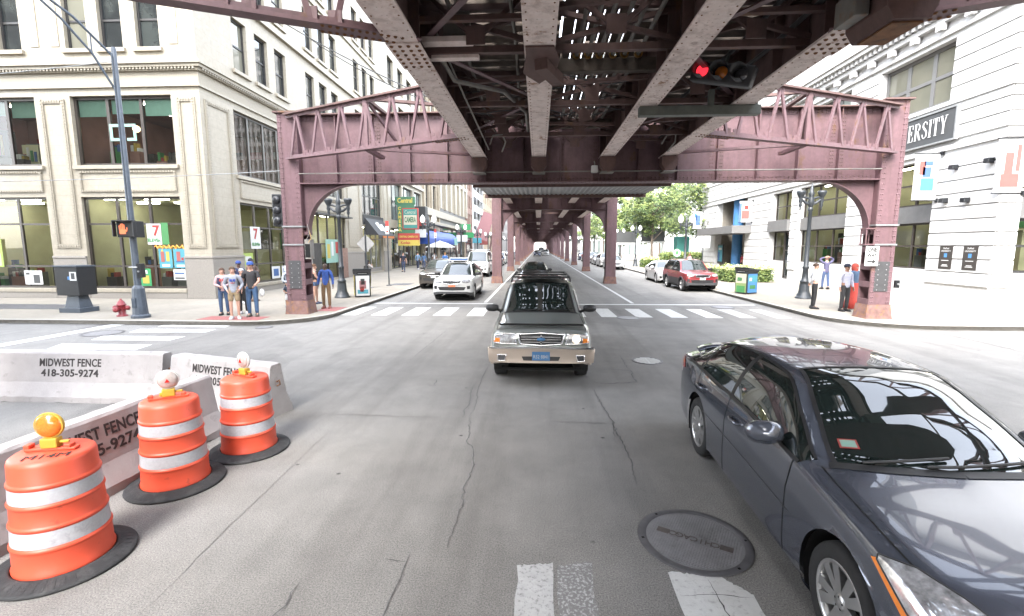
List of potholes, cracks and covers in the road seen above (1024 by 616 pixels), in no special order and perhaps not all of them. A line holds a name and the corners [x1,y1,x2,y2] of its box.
crack [272,584,299,616]
crack [447,364,489,547]
manhole cover [632,357,663,365]
crack [685,580,749,616]
manhole cover [637,509,755,577]
crack [548,356,637,484]
crack [382,554,410,616]
